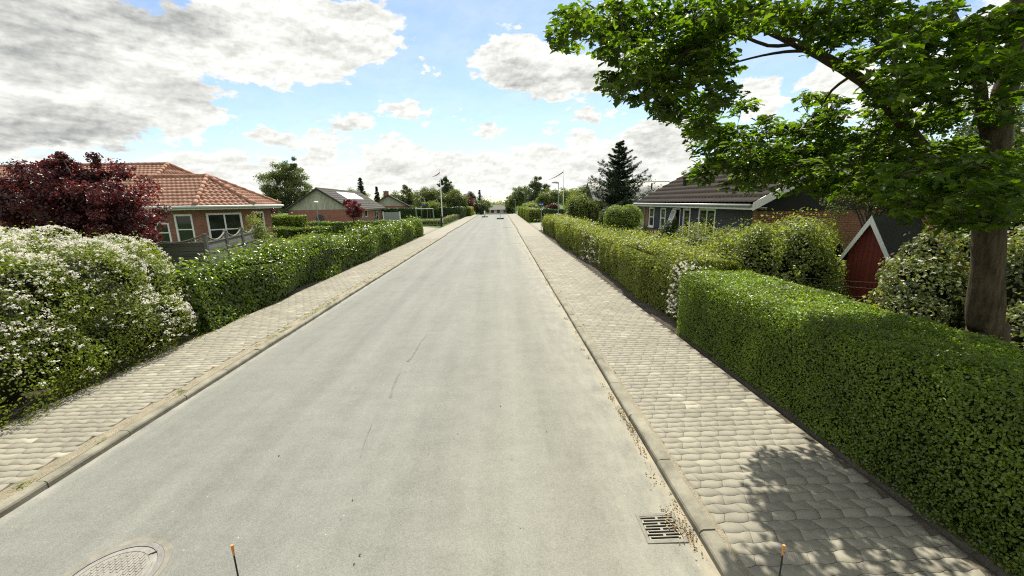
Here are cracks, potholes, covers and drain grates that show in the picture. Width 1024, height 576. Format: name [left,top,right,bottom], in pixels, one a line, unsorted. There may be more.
drain grate [635,513,689,544]
manhole cover [61,537,174,576]
crack [360,336,426,458]
